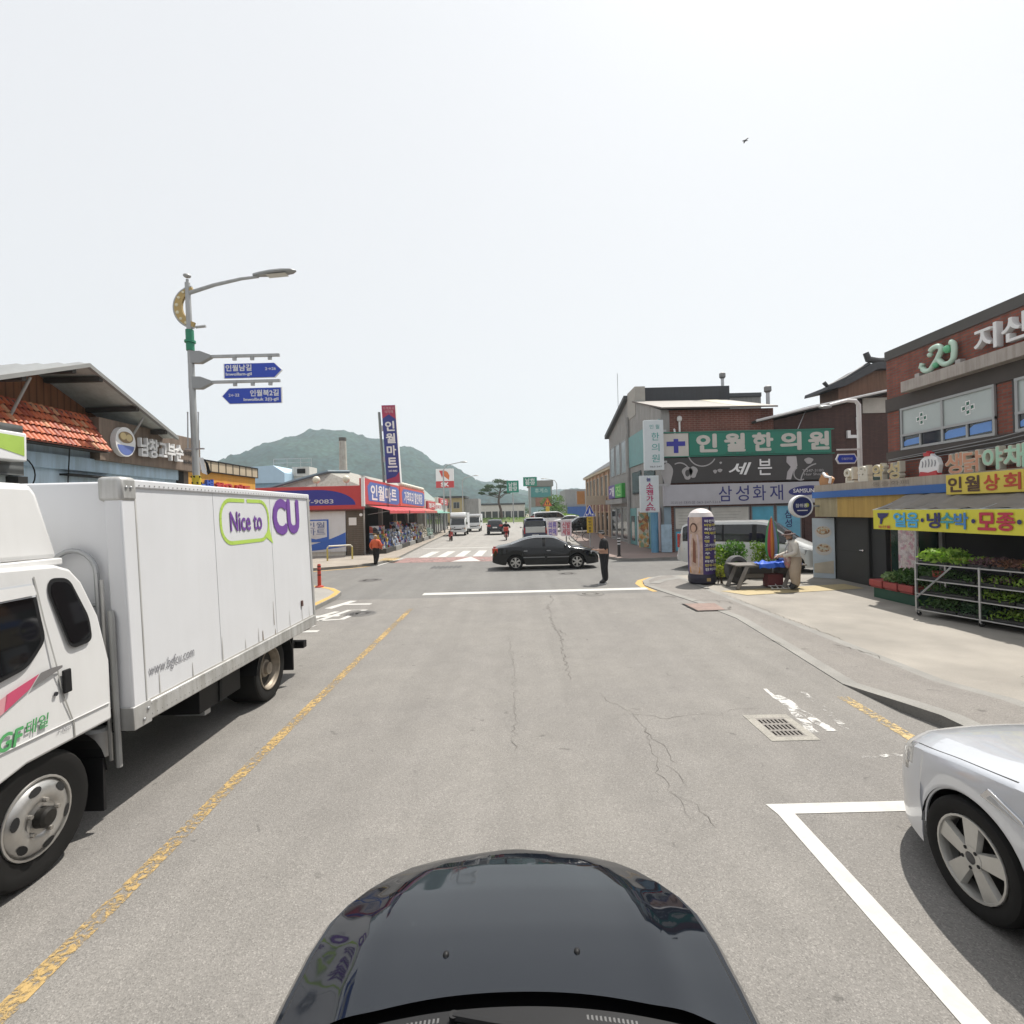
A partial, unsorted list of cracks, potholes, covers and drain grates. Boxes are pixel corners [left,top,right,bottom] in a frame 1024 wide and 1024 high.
crack [601,695,751,825]
drain grate [742,714,820,741]
crack [546,595,571,679]
